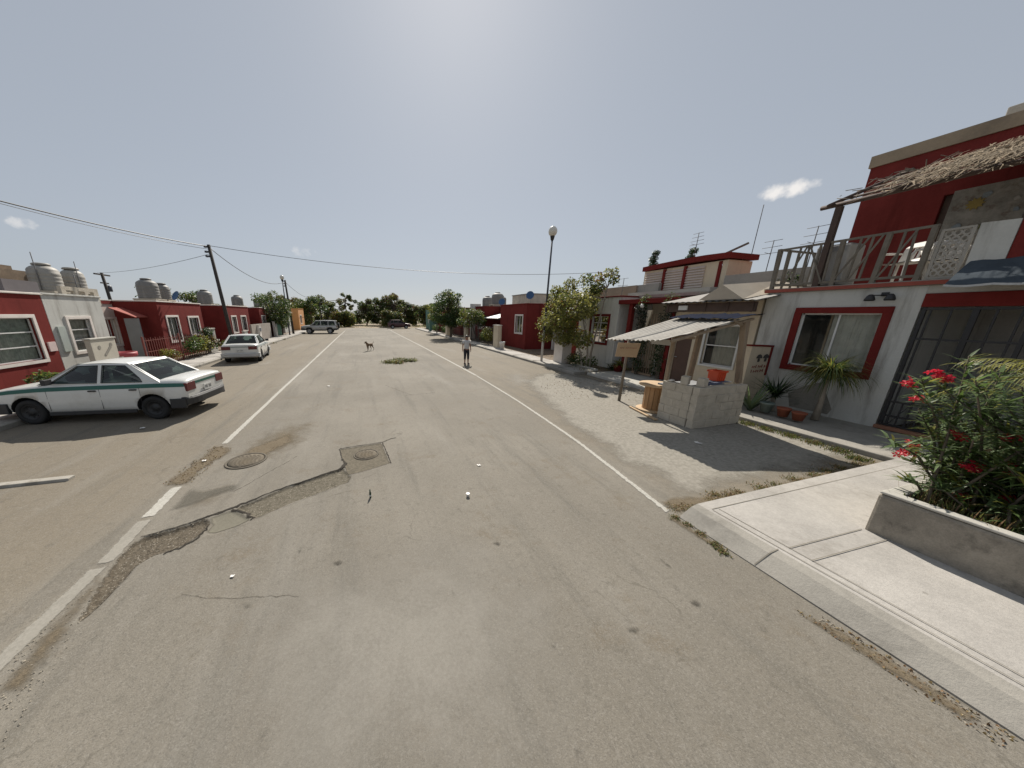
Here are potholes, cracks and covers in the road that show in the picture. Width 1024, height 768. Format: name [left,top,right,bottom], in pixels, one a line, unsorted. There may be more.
pothole [79,519,210,620]
pothole [238,469,351,518]
manhole cover [224,452,268,469]
manhole cover [353,449,379,460]
